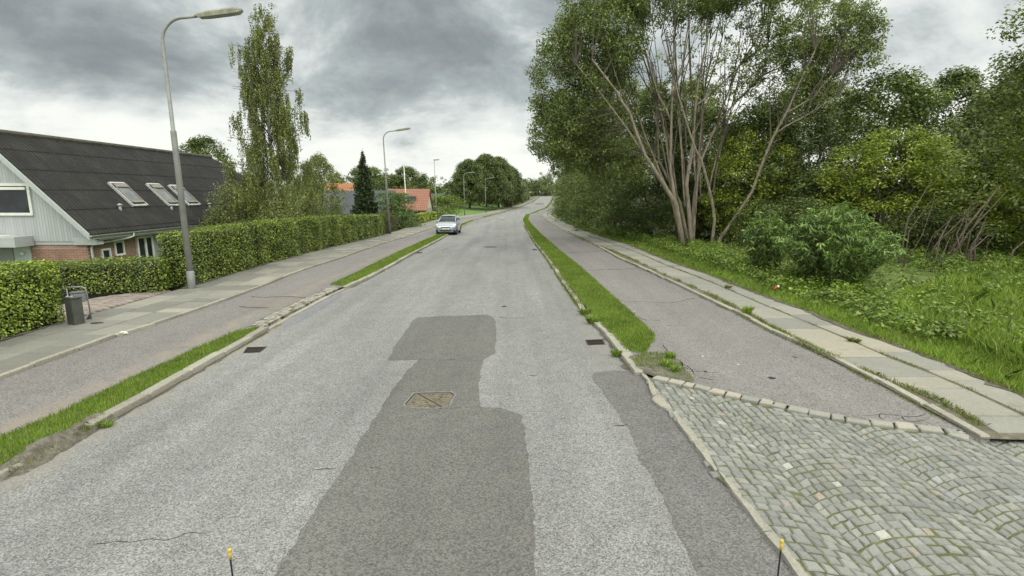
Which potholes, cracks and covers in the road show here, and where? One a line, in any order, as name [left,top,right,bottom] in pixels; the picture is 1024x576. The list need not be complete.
manhole cover [403,391,456,409]
crack [663,345,718,380]
crack [85,532,210,546]
crack [867,414,925,422]
